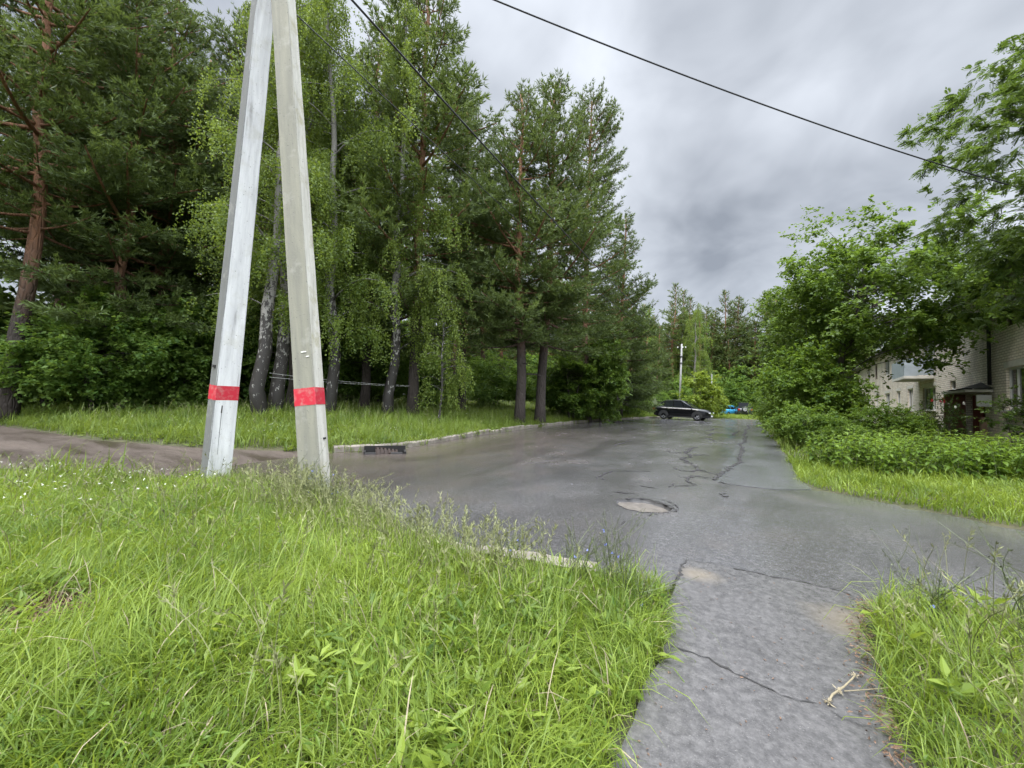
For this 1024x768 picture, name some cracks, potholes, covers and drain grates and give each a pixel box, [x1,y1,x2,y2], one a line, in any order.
crack [671,645,871,726]
crack [667,559,687,597]
crack [596,428,739,496]
drain grate [363,445,406,455]
